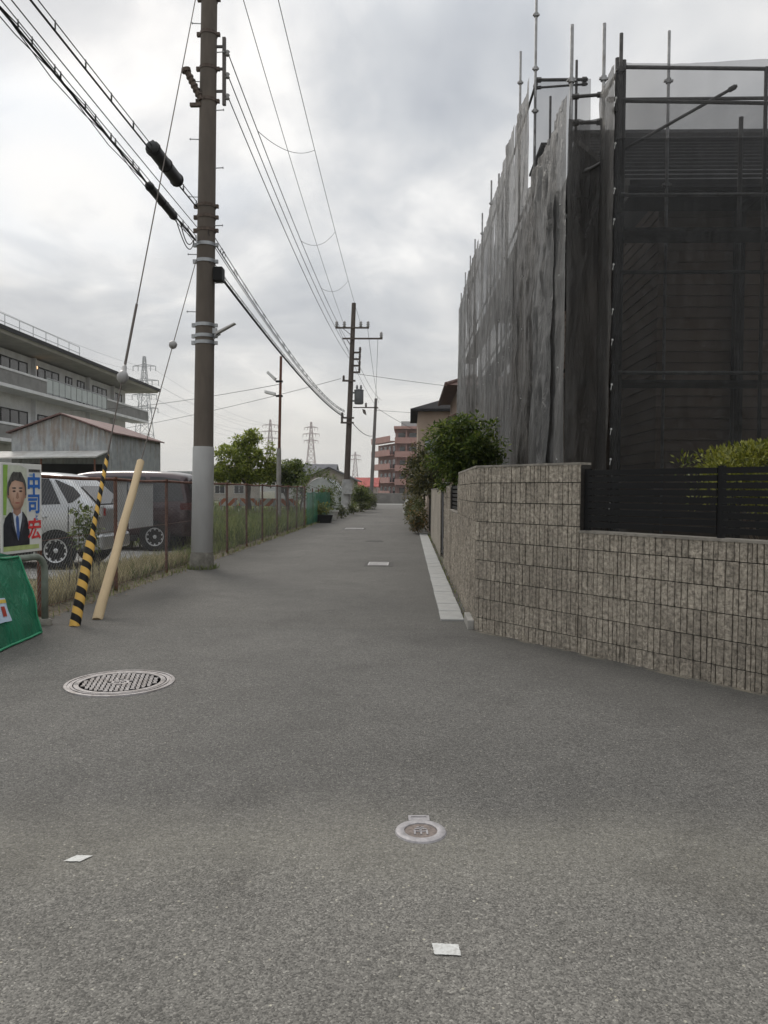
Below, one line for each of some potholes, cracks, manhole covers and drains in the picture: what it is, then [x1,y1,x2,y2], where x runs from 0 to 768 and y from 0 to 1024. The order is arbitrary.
manhole cover [63,670,175,698]
manhole cover [395,815,447,844]
